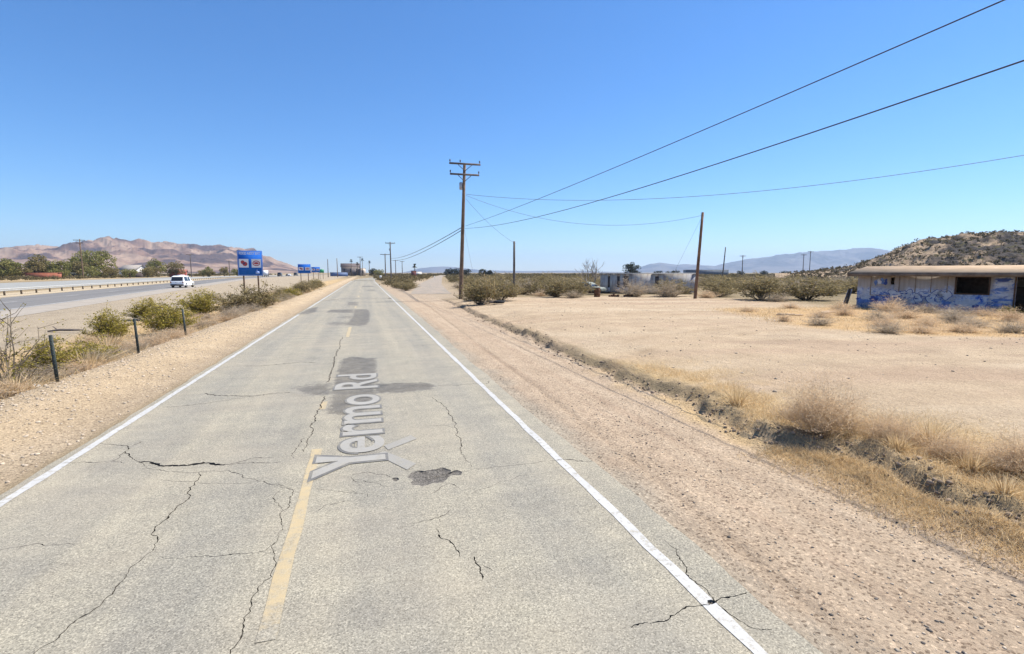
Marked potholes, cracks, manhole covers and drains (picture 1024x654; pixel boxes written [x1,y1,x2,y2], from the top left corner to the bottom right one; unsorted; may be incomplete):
pothole [408,468,462,486]
crack [416,511,493,579]
crack [34,442,294,654]
crack [631,543,772,631]
crack [432,382,588,493]
